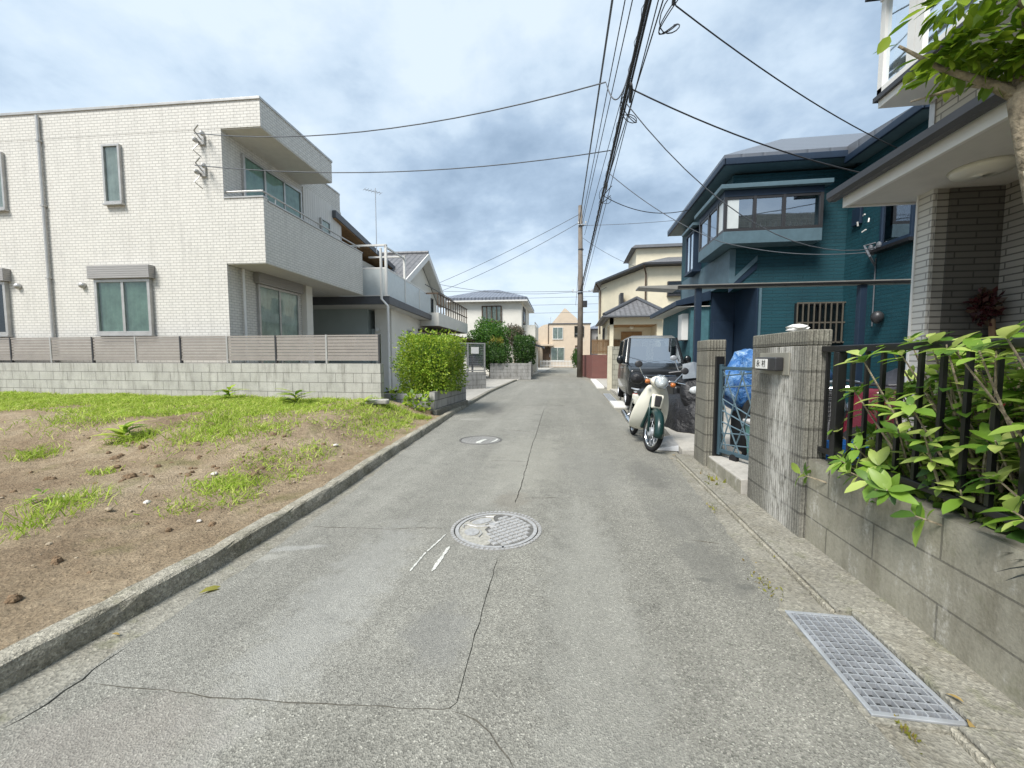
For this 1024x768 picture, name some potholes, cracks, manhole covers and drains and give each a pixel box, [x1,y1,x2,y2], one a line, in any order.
manhole cover [450,511,542,551]
crack [2,562,514,768]
manhole cover [459,436,502,445]
drain grate [776,608,969,734]
